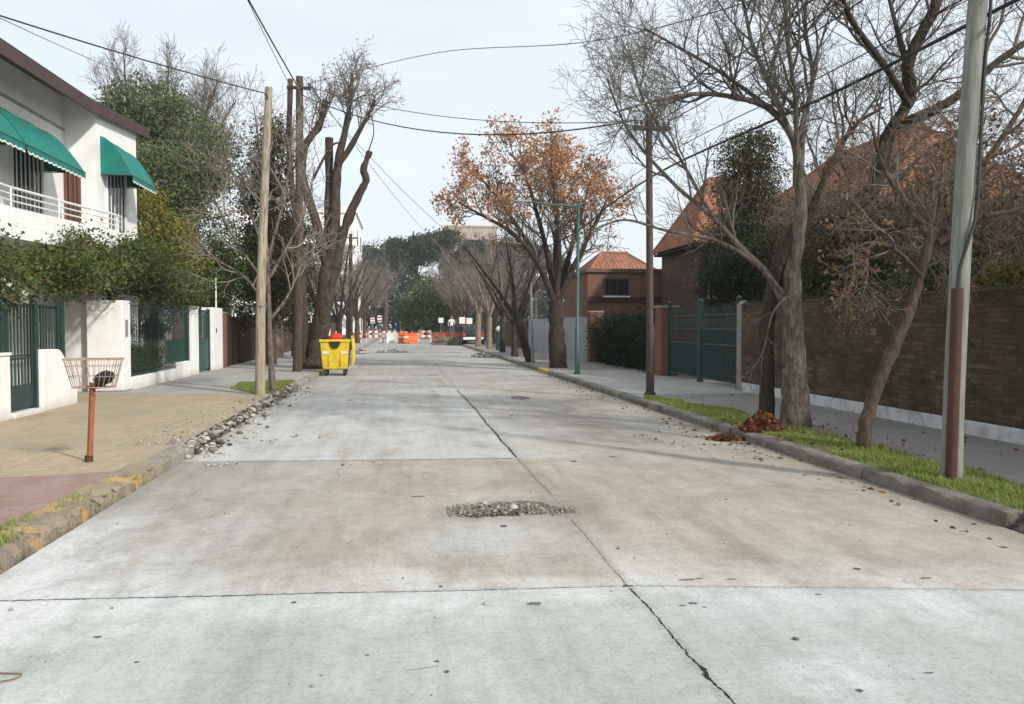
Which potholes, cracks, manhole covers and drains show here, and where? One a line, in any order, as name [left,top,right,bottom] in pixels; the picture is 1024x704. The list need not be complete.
pothole [445,500,581,519]
